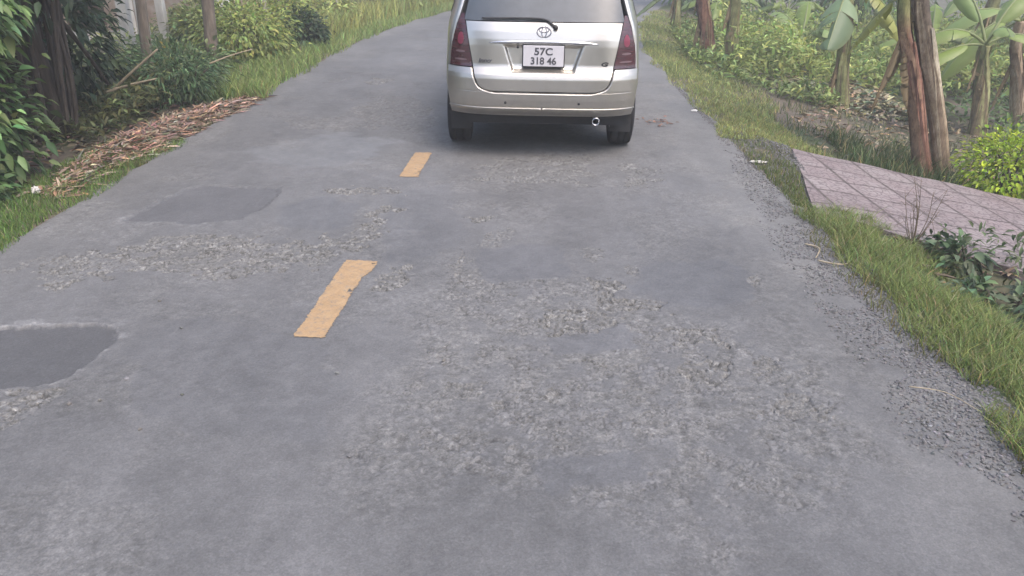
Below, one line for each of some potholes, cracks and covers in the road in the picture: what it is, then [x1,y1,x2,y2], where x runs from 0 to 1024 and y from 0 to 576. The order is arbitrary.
pothole [0,318,130,392]
